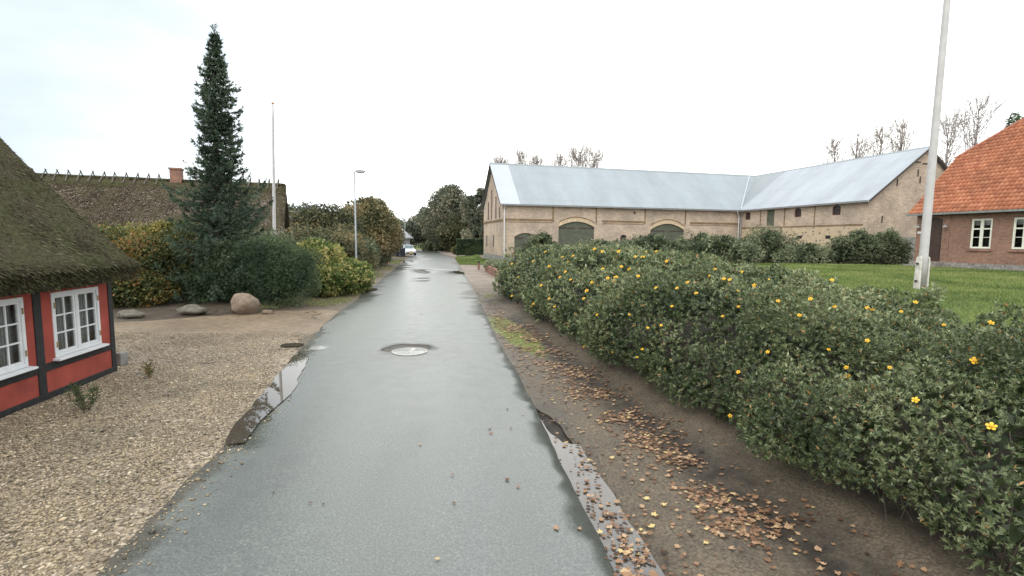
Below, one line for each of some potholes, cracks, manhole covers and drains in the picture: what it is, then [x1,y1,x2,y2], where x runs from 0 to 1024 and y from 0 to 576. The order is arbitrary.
manhole cover [391,347,428,356]
pothole [536,409,573,444]
